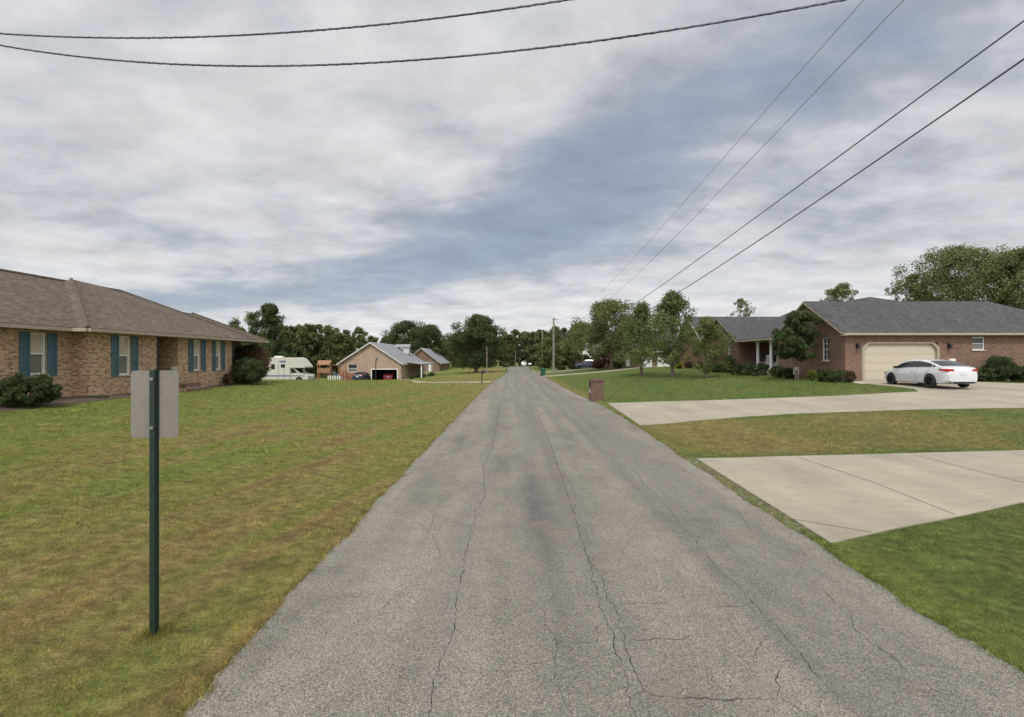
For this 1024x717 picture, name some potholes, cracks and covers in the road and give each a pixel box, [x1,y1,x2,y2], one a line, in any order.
crack [821,588,935,691]
crack [531,400,774,717]
crack [634,470,853,711]
crack [419,401,500,716]
